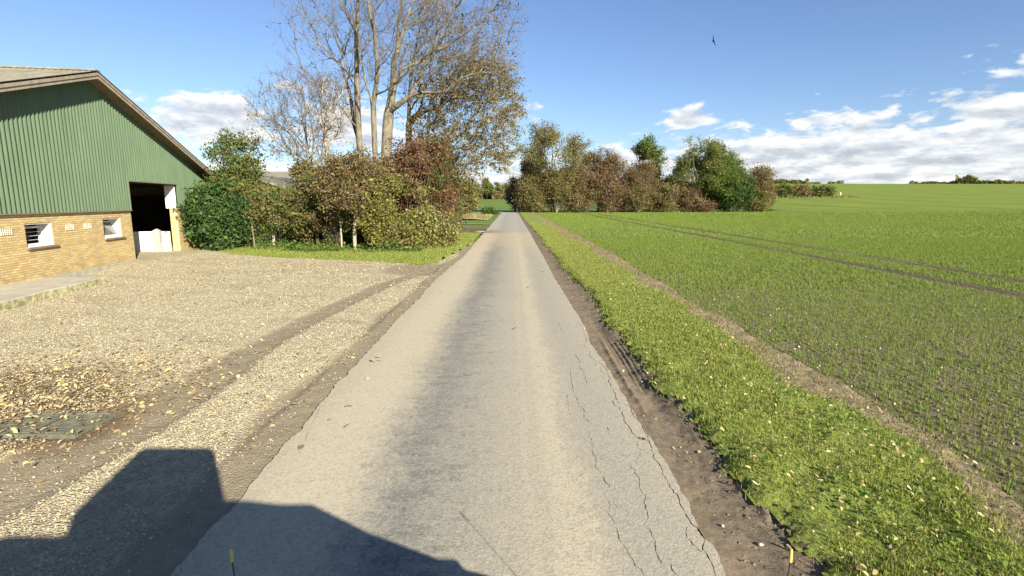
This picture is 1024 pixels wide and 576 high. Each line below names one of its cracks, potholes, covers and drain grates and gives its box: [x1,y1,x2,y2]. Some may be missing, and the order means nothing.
crack [558,323,727,576]
